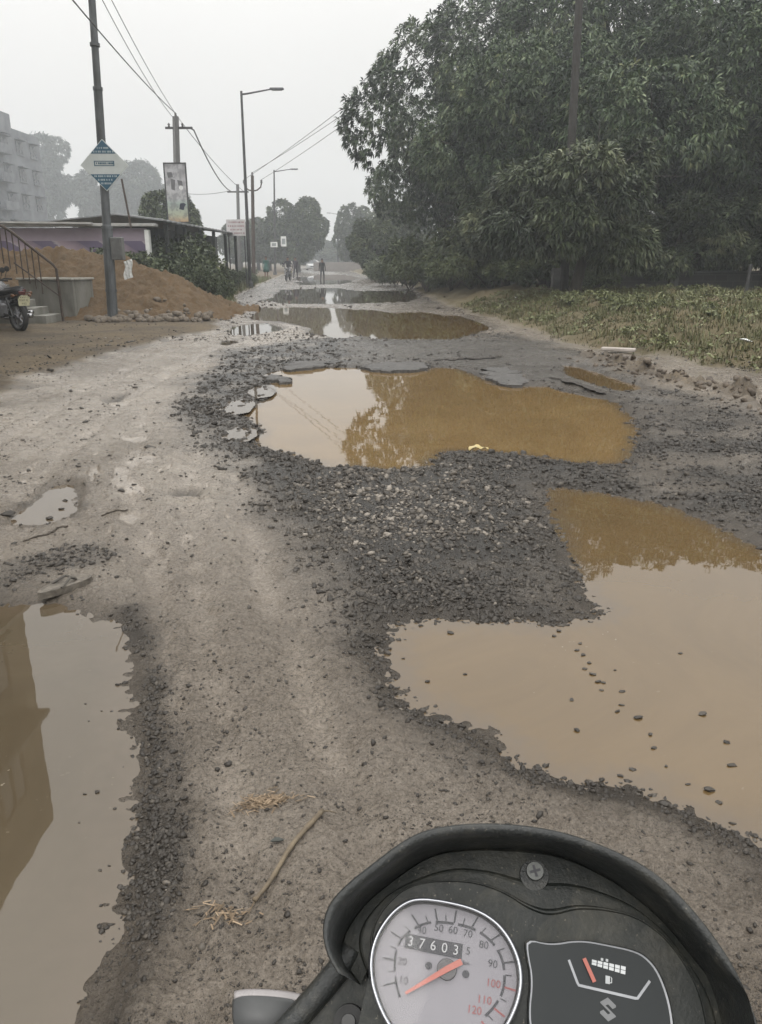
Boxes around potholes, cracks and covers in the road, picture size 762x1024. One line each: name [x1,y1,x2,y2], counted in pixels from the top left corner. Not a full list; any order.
pothole [0,596,154,1024]
pothole [366,485,762,856]
pothole [249,305,495,340]
pothole [261,287,422,304]
pothole [238,364,645,469]
pothole [0,478,85,525]
